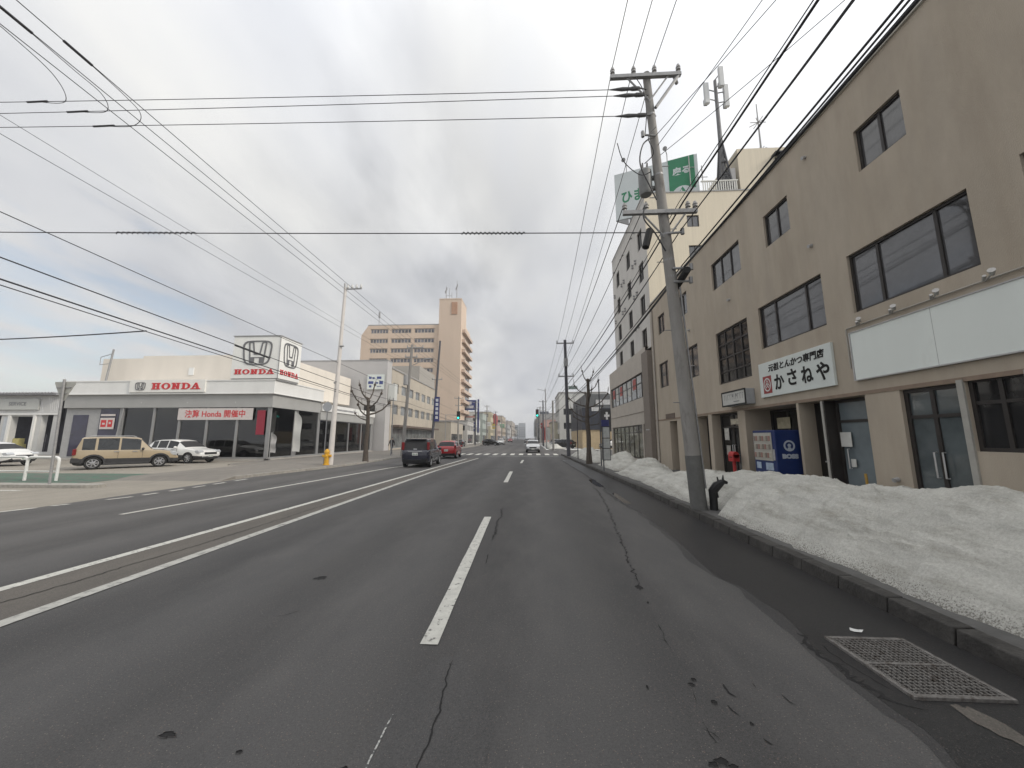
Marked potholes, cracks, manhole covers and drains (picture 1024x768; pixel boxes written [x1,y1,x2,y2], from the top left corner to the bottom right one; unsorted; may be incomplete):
crack [594,488,640,591]
drain grate [824,636,1019,704]
crack [416,660,453,768]
pothole [712,757,729,768]
pothole [156,731,176,739]
